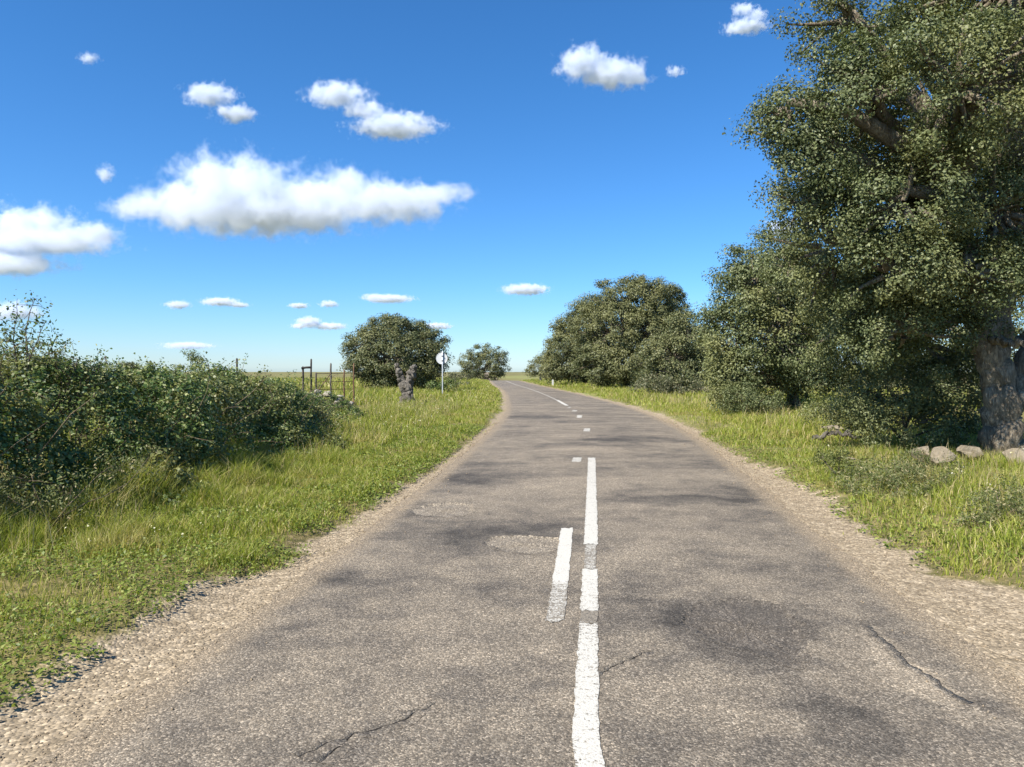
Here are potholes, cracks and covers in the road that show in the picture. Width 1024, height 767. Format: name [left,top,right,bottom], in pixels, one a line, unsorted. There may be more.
crack [598,648,657,680]
crack [291,701,446,765]
crack [860,625,982,704]
